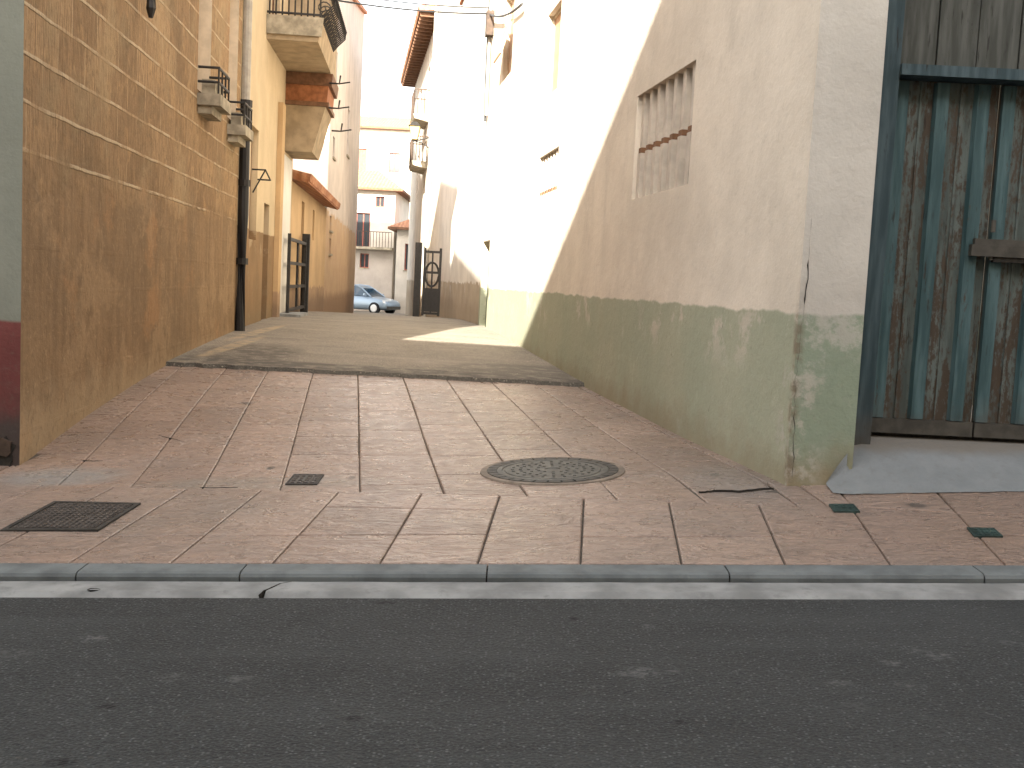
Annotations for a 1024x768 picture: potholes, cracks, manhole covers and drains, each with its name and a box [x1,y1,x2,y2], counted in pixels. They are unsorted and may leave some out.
manhole cover [480,457,625,487]
manhole cover [967,527,1003,539]
manhole cover [829,504,860,515]
crack [258,582,287,598]
